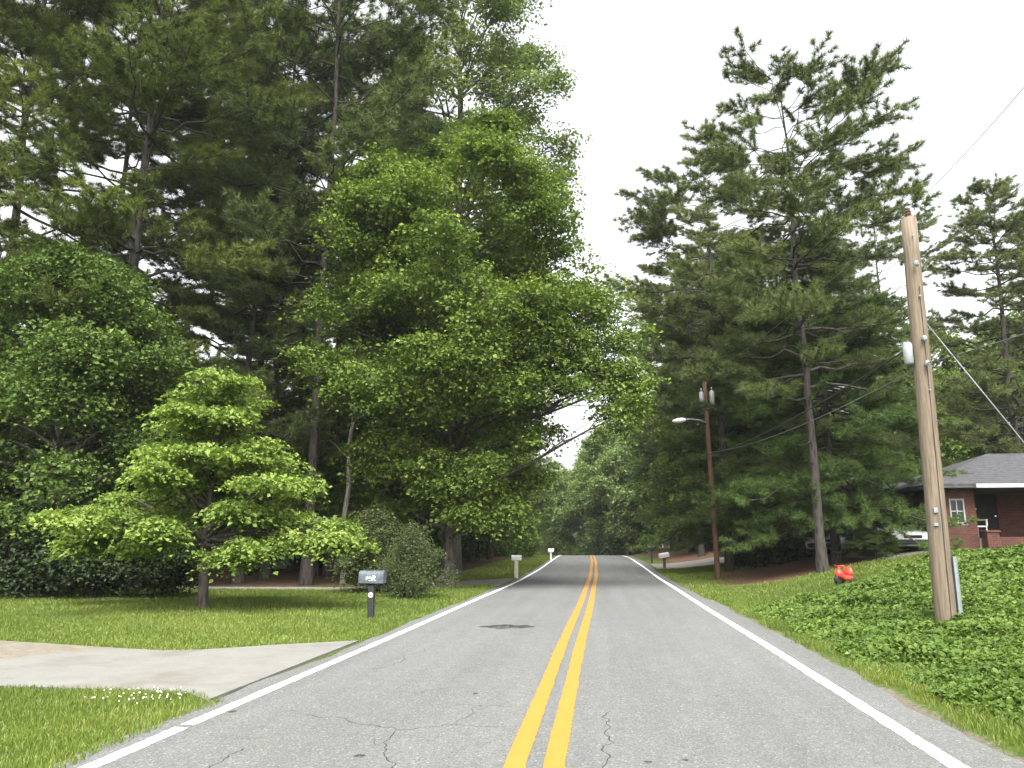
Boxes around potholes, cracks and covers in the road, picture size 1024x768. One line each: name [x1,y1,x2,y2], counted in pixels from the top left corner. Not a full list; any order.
crack [601,711,613,768]
crack [312,704,508,768]
